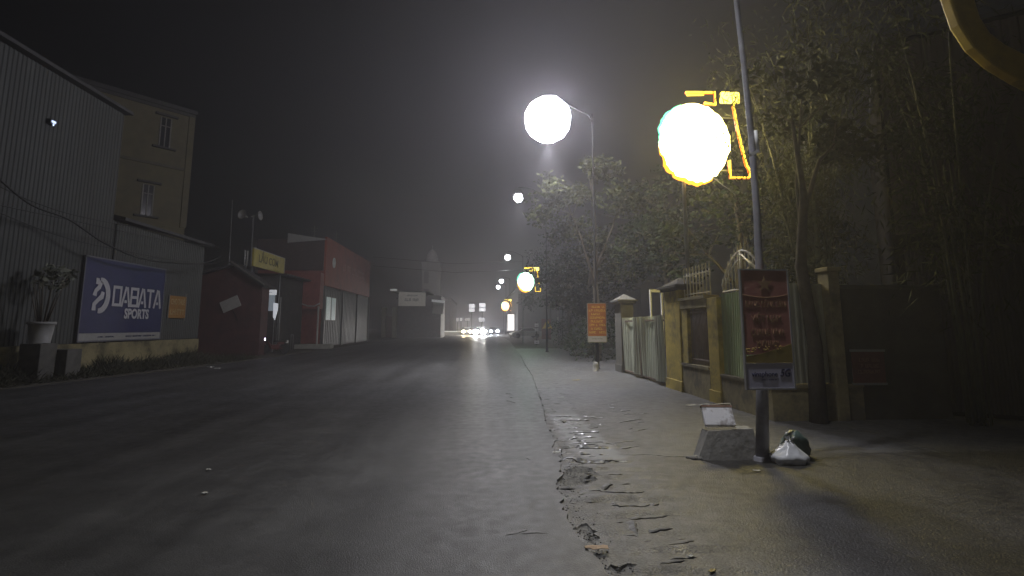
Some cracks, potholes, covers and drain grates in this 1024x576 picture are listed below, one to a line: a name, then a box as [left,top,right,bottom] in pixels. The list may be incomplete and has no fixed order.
pothole [560,466,599,487]
crack [552,384,698,565]
pothole [576,523,600,545]
